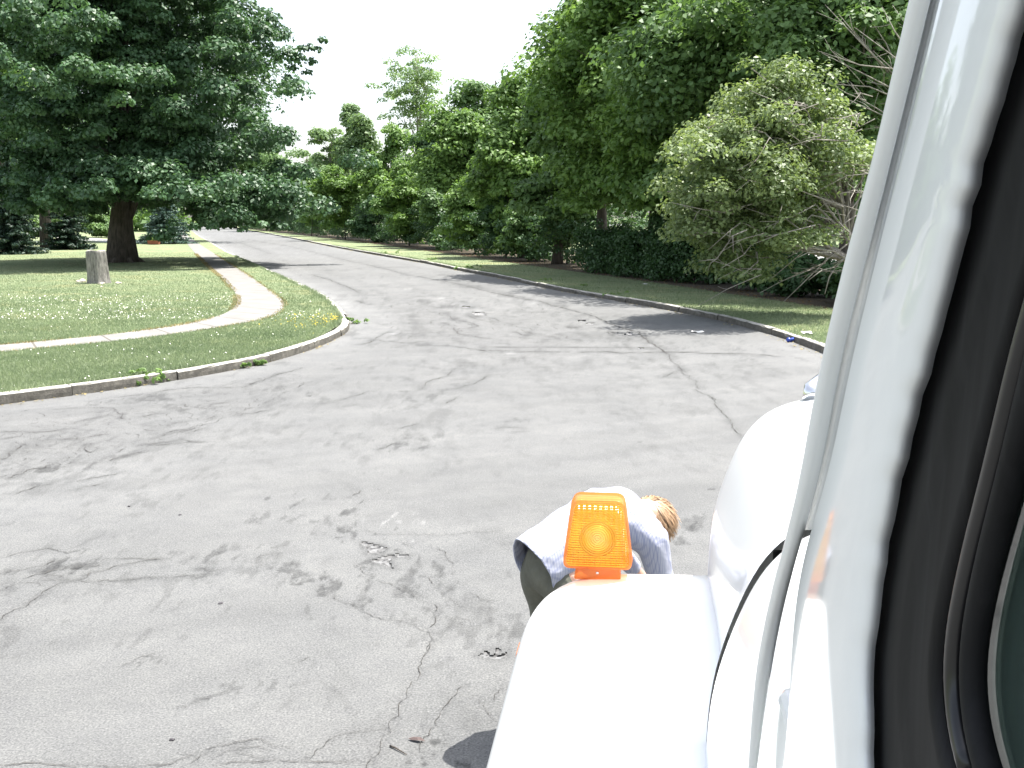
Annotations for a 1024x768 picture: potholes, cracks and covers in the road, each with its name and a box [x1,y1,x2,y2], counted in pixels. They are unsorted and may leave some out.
pothole [478,648,507,659]
pothole [372,554,409,569]
crack [0,596,430,768]
pothole [362,542,387,554]
crack [356,288,771,433]
crack [0,371,312,493]
crack [2,548,222,618]
